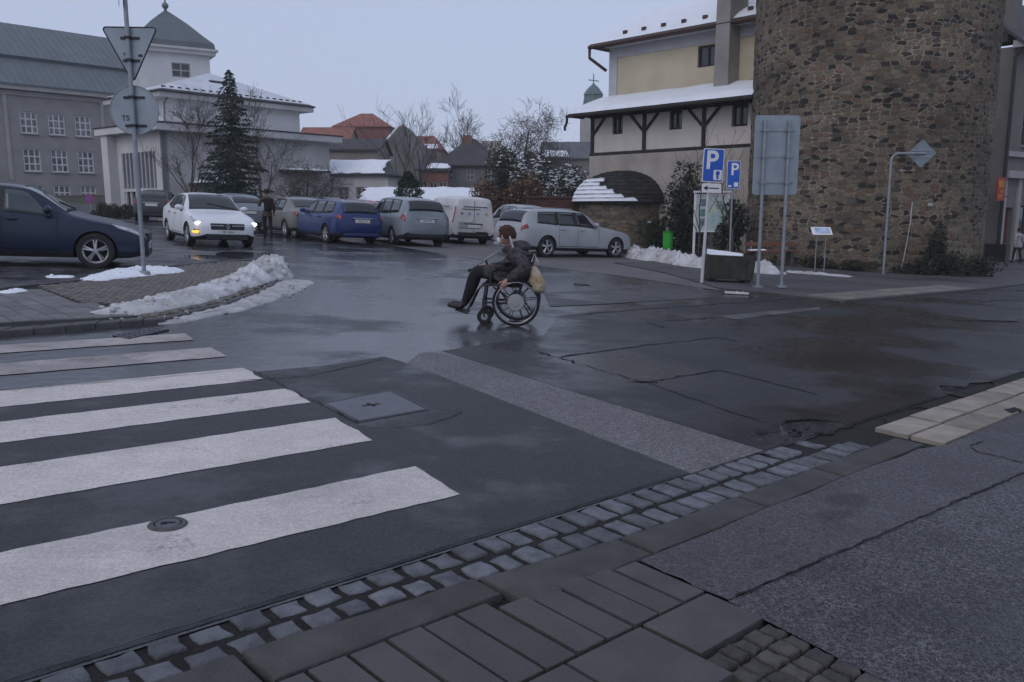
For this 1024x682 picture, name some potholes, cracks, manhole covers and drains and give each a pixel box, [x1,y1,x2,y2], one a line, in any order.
crack [649,370,818,395]
manhole cover [147,516,188,532]
pothole [747,419,854,447]
manhole cover [321,390,429,422]
drain grate [113,327,169,339]
crack [537,298,798,363]
